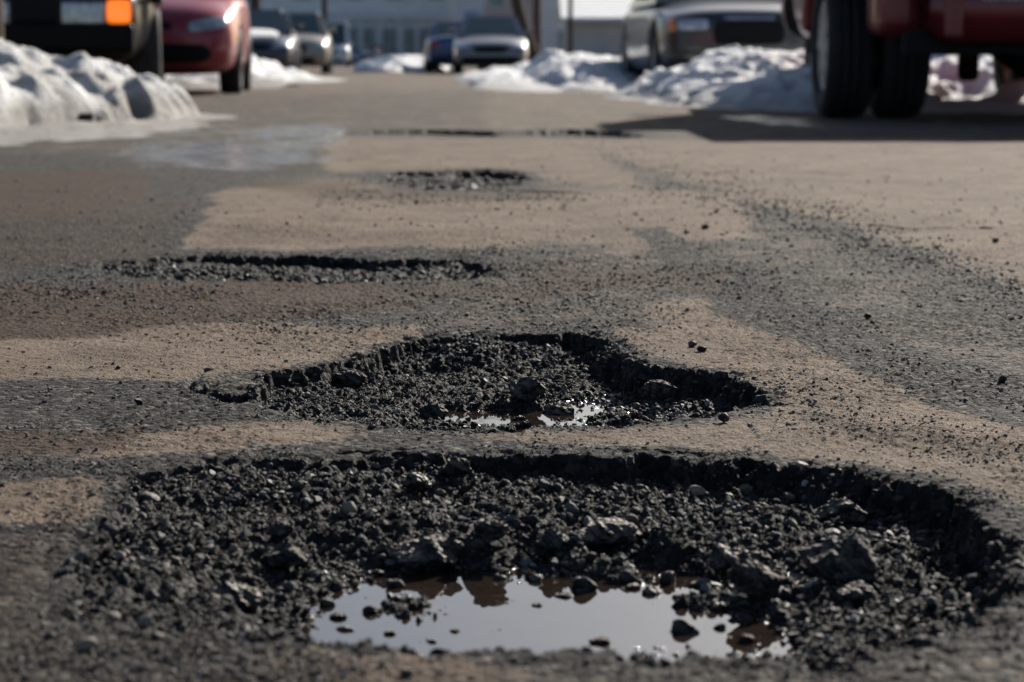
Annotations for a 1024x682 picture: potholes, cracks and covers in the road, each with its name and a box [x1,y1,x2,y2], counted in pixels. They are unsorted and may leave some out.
pothole [368,169,532,190]
pothole [57,450,1024,672]
pothole [96,253,496,285]
pothole [190,332,770,432]
pothole [524,129,640,139]
